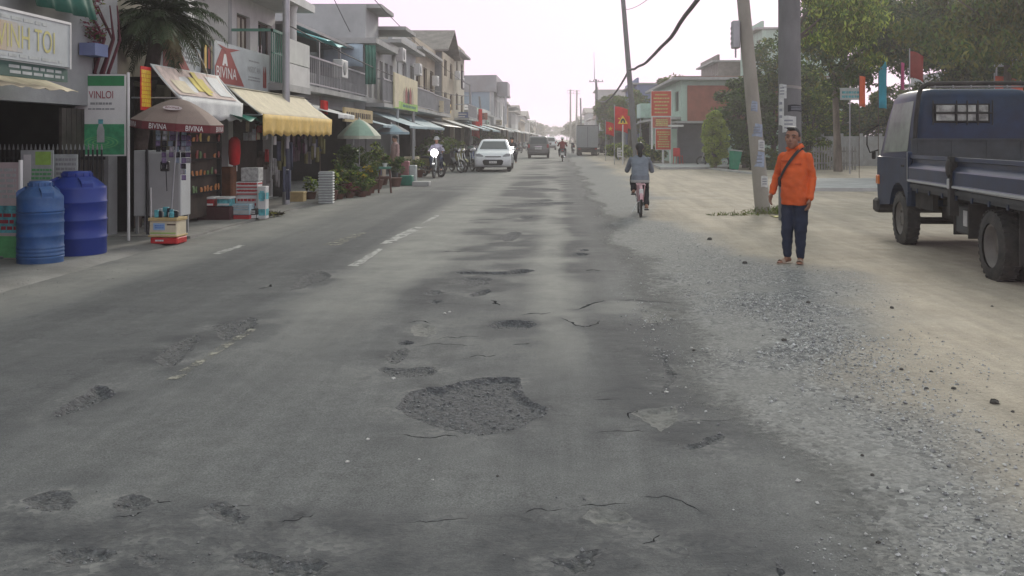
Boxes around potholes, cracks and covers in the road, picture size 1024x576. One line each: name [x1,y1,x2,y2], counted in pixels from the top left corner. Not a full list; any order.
pothole [190,317,262,340]
pothole [202,501,250,526]
pothole [111,493,155,513]
crack [641,495,701,512]
pothole [378,367,438,378]
pothole [53,385,116,417]
pothole [486,320,537,330]
pothole [153,334,227,369]
pothole [395,377,550,436]
pothole [47,546,117,567]
crack [524,301,602,327]
